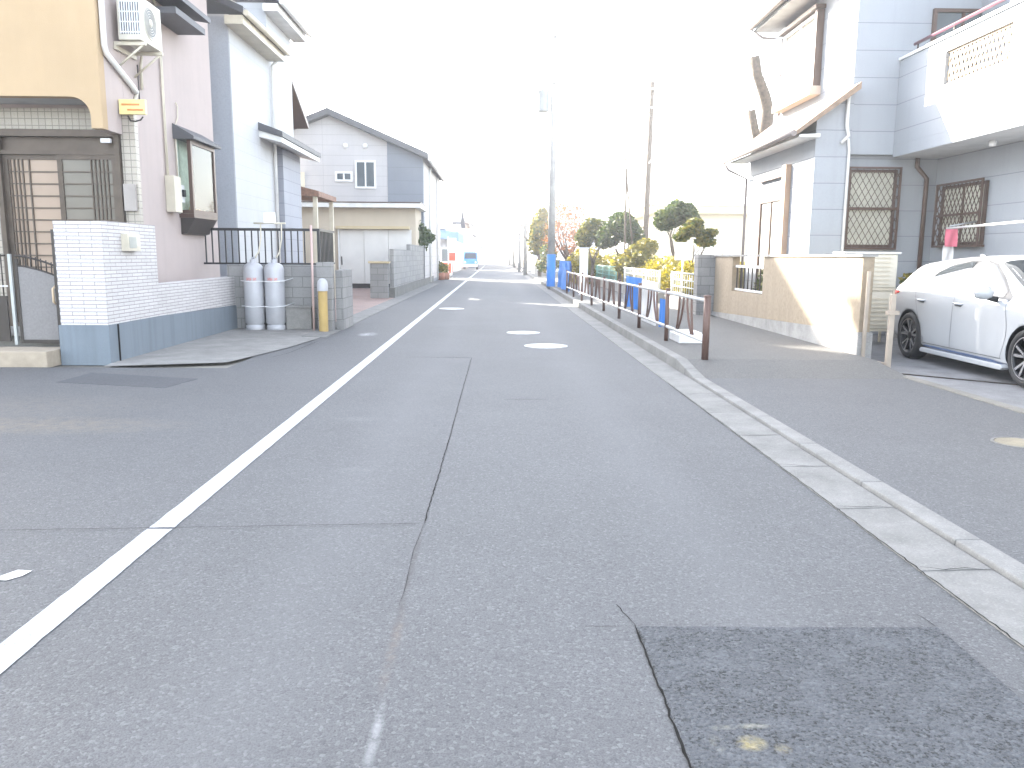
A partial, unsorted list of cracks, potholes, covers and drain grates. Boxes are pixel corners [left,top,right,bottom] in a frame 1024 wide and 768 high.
manhole cover [990,437,1024,449]
crack [616,604,692,768]
crack [30,357,472,605]
